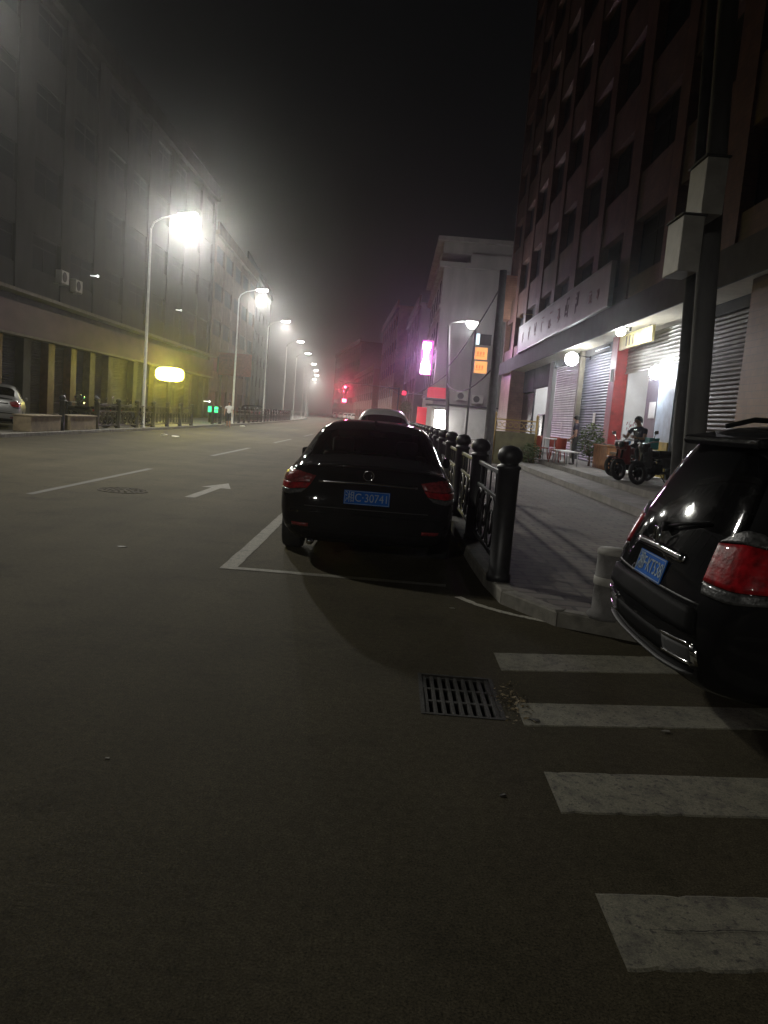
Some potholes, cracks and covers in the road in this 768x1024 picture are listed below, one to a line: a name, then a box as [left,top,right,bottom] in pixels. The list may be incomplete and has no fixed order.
drain grate [417,672,507,721]
